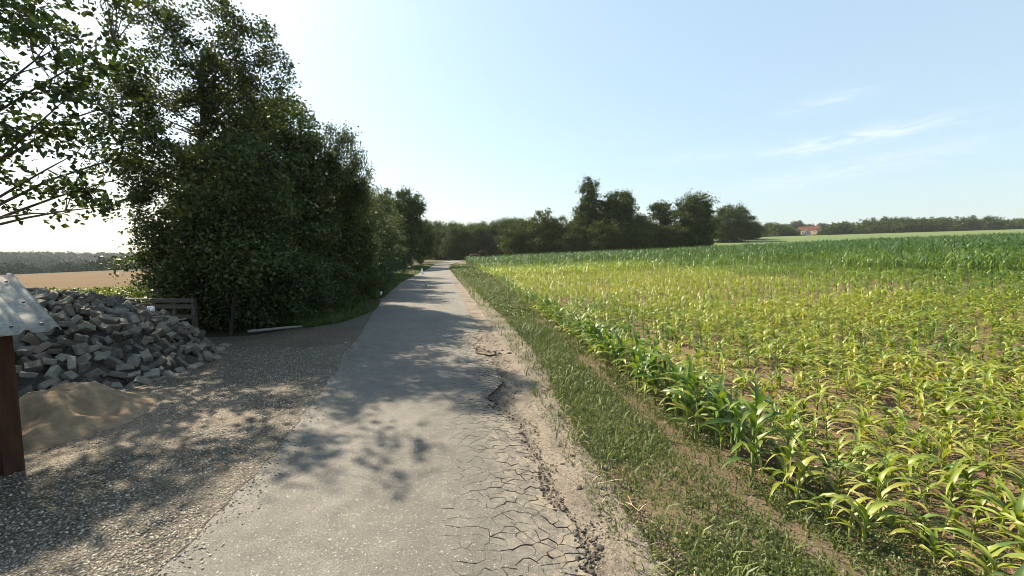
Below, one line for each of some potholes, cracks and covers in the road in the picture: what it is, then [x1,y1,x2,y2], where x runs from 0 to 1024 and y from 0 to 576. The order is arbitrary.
crack [439,331,589,576]
pothole [488,383,510,404]
